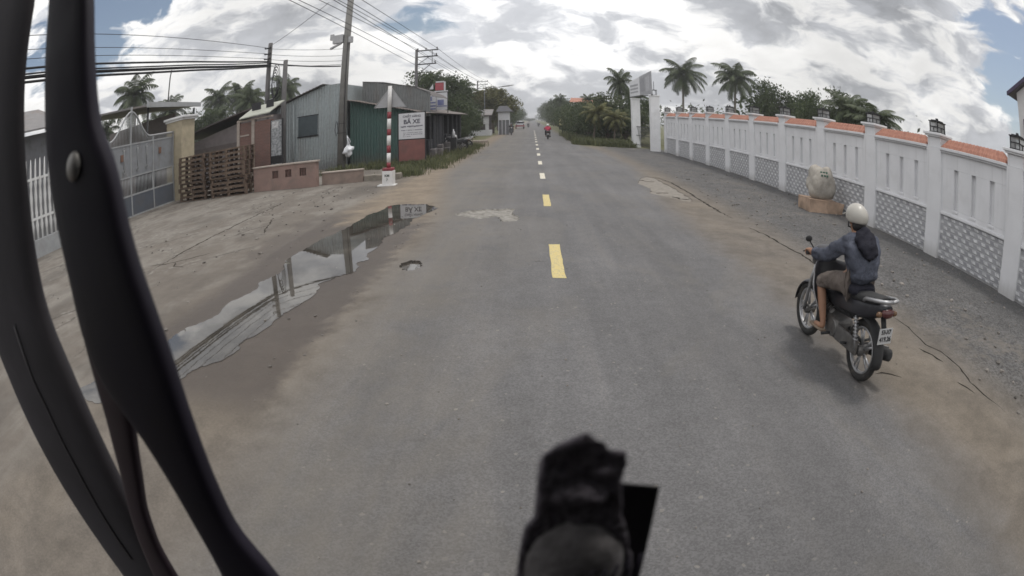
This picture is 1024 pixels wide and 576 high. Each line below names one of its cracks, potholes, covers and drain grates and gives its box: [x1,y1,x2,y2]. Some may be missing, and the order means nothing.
pothole [399,260,423,271]
crack [638,177,814,264]
crack [893,317,1004,411]
